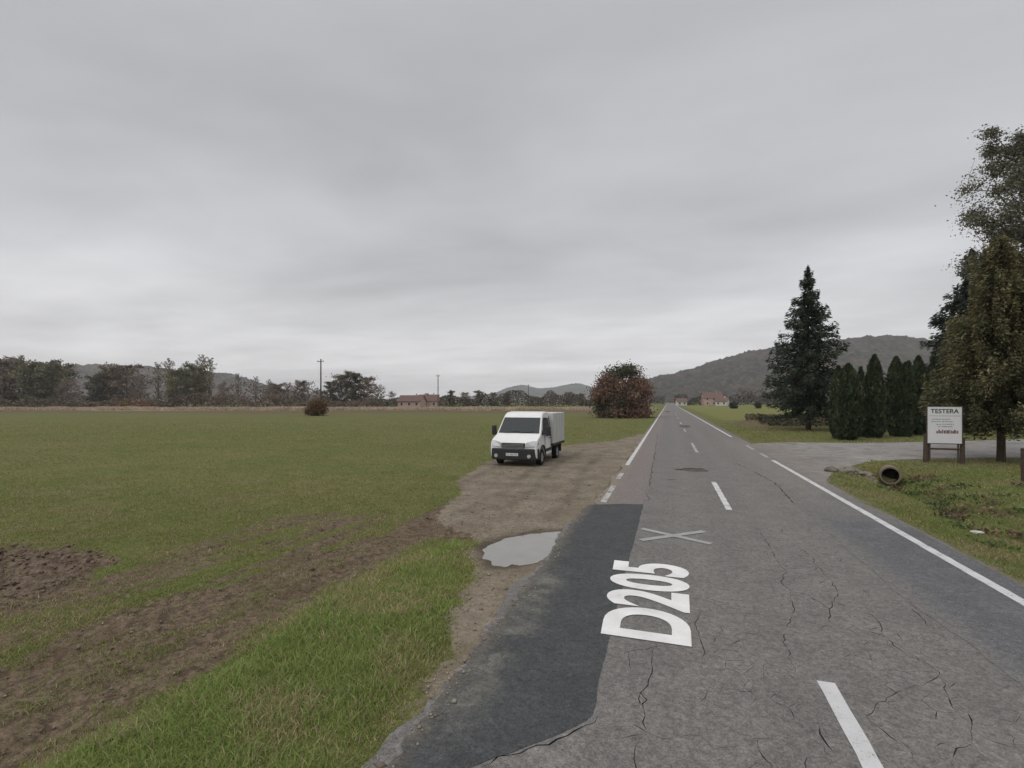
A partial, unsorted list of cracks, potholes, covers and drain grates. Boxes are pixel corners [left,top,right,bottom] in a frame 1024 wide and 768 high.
crack [618,646,669,768]
crack [759,527,866,670]
crack [668,596,835,768]
crack [821,611,1024,768]
